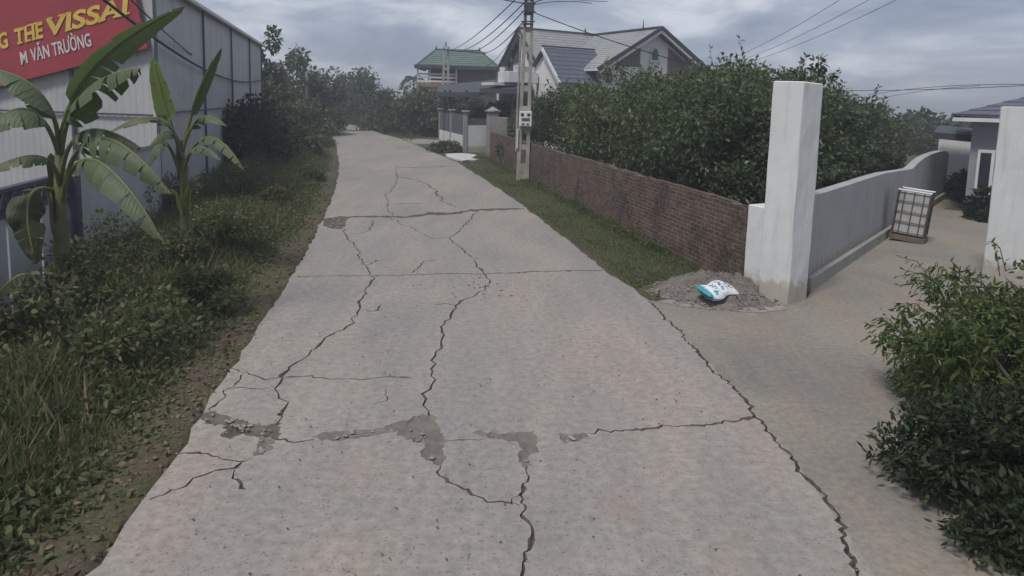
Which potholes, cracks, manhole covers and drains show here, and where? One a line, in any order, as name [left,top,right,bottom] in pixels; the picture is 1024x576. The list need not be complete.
pothole [473,430,539,469]
crack [146,166,860,576]
pothole [557,433,589,443]
pothole [323,217,348,229]
pothole [390,414,447,466]
pothole [312,425,391,442]
pothole [200,411,282,440]
